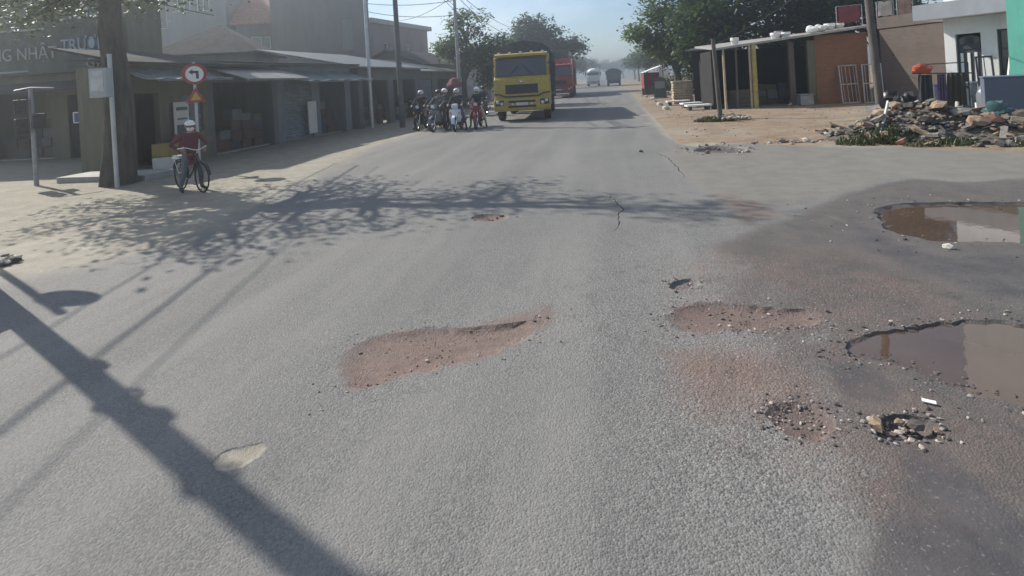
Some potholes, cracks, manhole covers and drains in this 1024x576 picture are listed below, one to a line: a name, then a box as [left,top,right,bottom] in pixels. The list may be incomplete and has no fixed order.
pothole [634,296,867,342]
pothole [848,406,963,453]
pothole [786,194,1024,258]
pothole [674,142,755,157]
pothole [308,306,582,415]
pothole [662,277,703,293]
pothole [752,385,857,453]
pothole [464,212,518,221]
pothole [763,299,1024,423]
